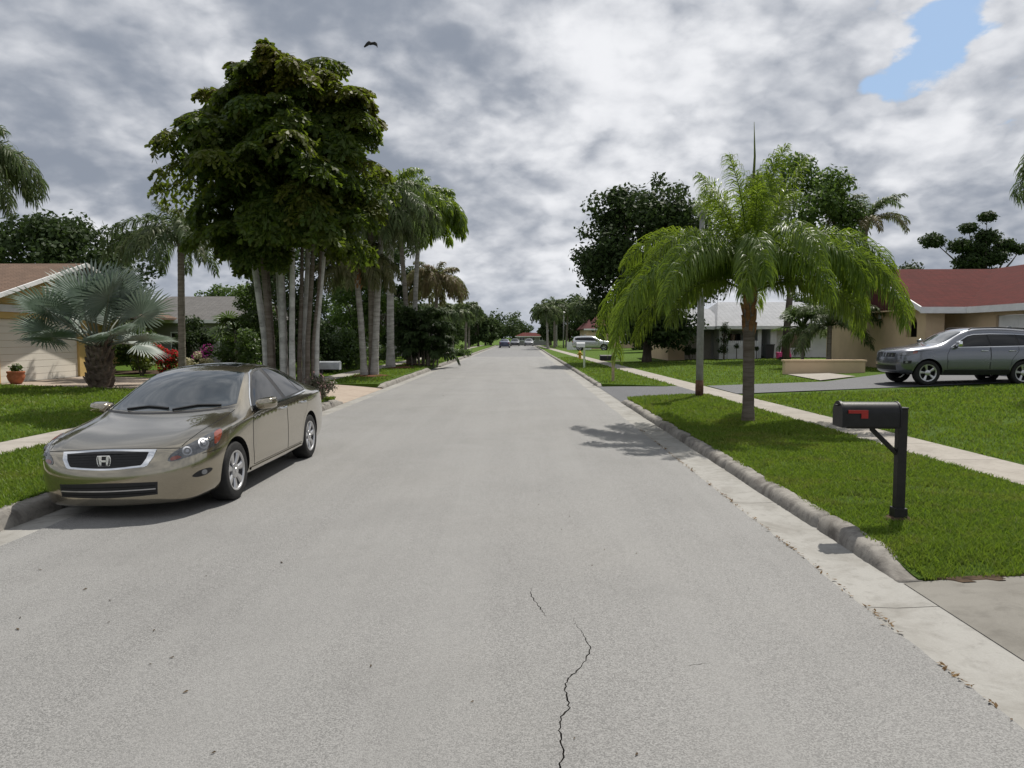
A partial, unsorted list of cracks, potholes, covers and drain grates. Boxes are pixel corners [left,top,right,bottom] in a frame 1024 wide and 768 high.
crack [558,620,591,768]
